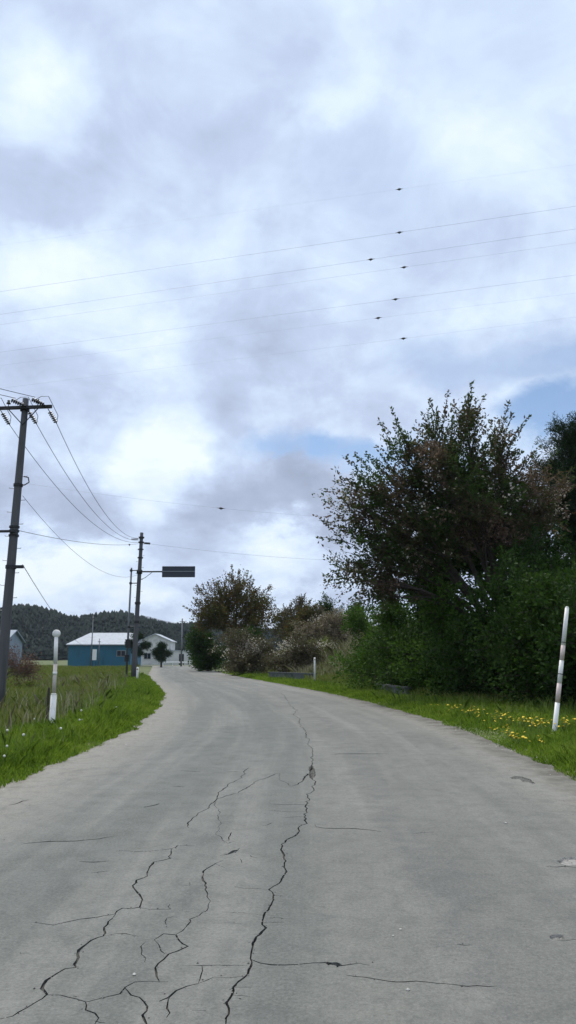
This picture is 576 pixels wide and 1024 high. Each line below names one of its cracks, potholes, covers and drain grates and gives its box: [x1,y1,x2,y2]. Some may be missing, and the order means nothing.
crack [0,704,493,1024]
pothole [558,857,576,865]
